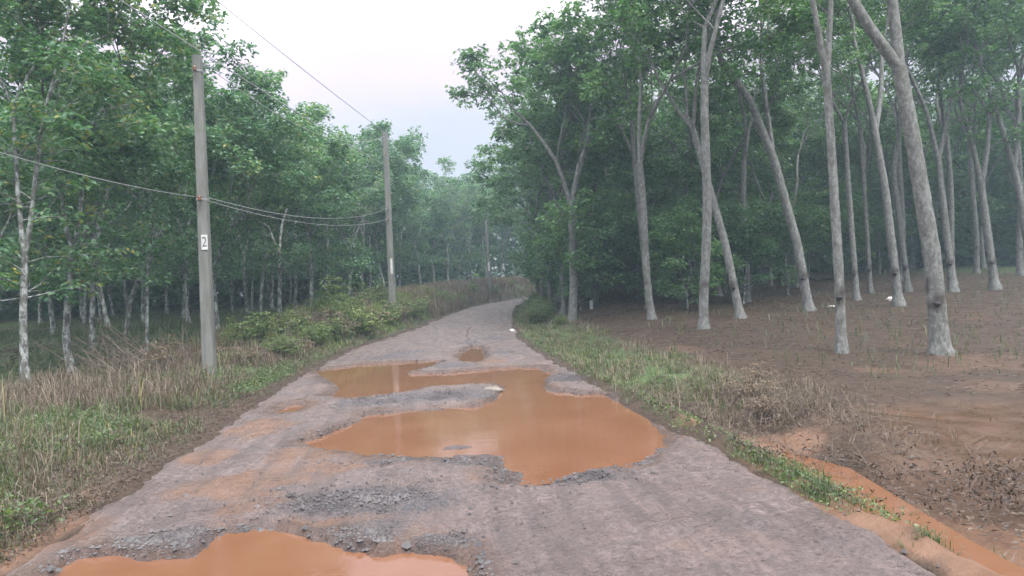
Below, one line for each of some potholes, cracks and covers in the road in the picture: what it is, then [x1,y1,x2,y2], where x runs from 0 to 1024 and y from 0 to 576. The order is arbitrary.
pothole [269,399,311,413]
pothole [314,359,562,398]
pothole [31,523,494,576]
pothole [454,345,493,362]
pothole [291,383,677,486]
